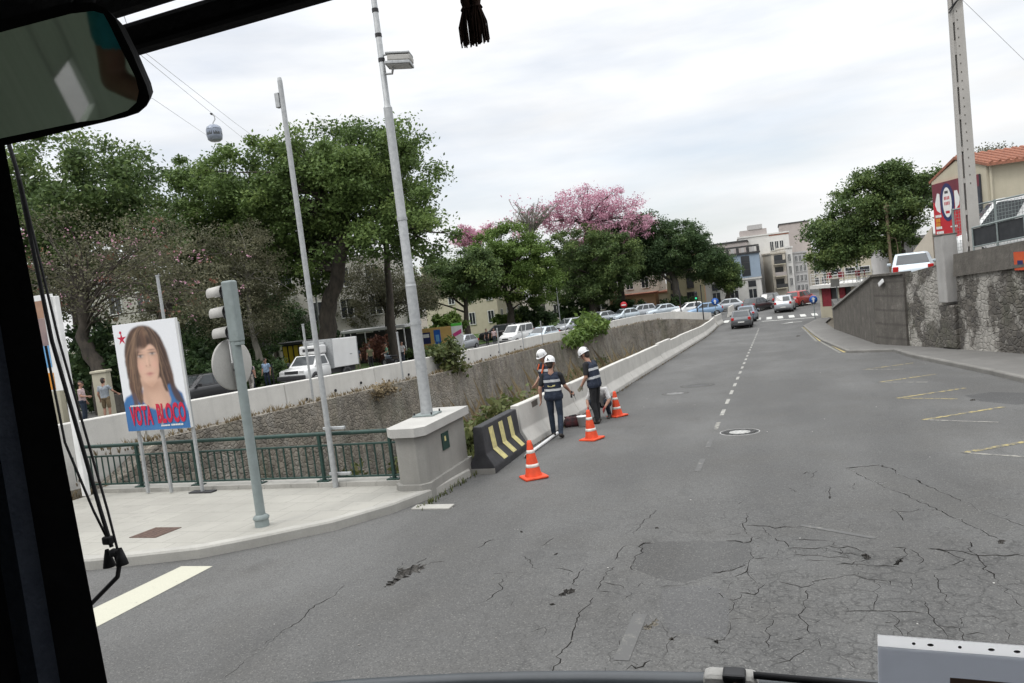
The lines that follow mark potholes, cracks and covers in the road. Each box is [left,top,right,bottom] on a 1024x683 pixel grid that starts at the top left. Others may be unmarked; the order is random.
crack [479,539,552,607]
manhole cover [129,527,182,538]
pothole [385,564,427,587]
crack [663,502,1024,664]
crack [534,511,656,671]
crack [223,587,342,679]
crack [605,621,681,671]
